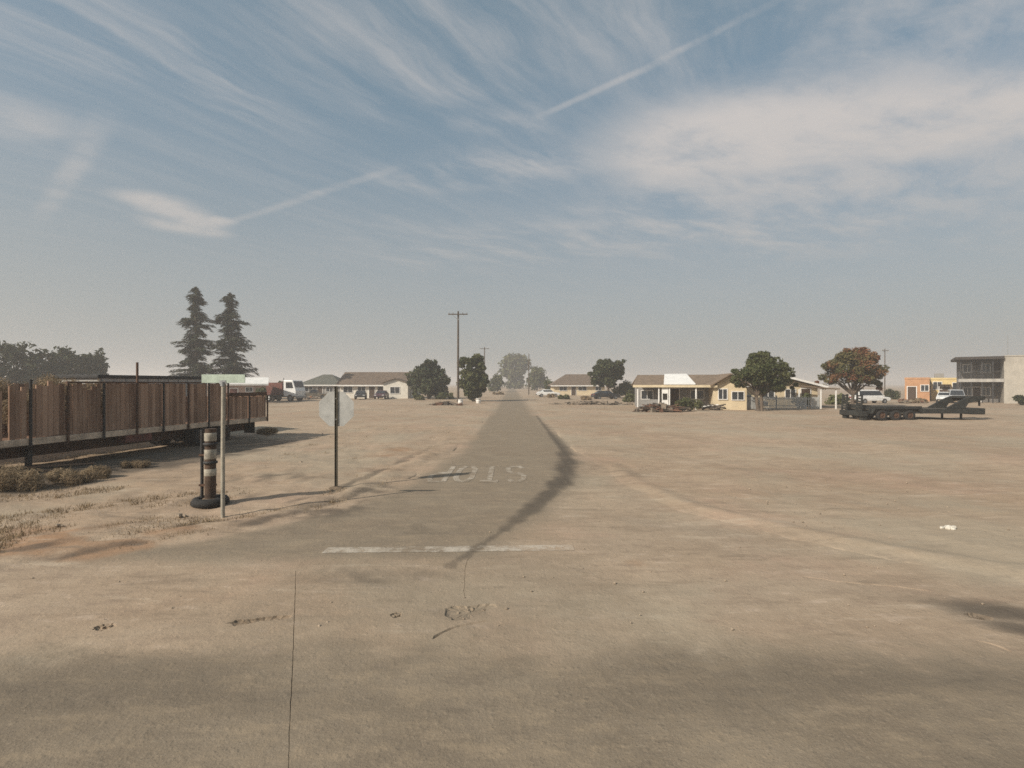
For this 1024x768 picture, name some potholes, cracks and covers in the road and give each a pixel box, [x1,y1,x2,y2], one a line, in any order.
pothole [92,623,117,631]
crack [433,621,484,639]
pothole [445,604,497,621]
pothole [225,615,292,626]
pothole [964,613,994,621]
